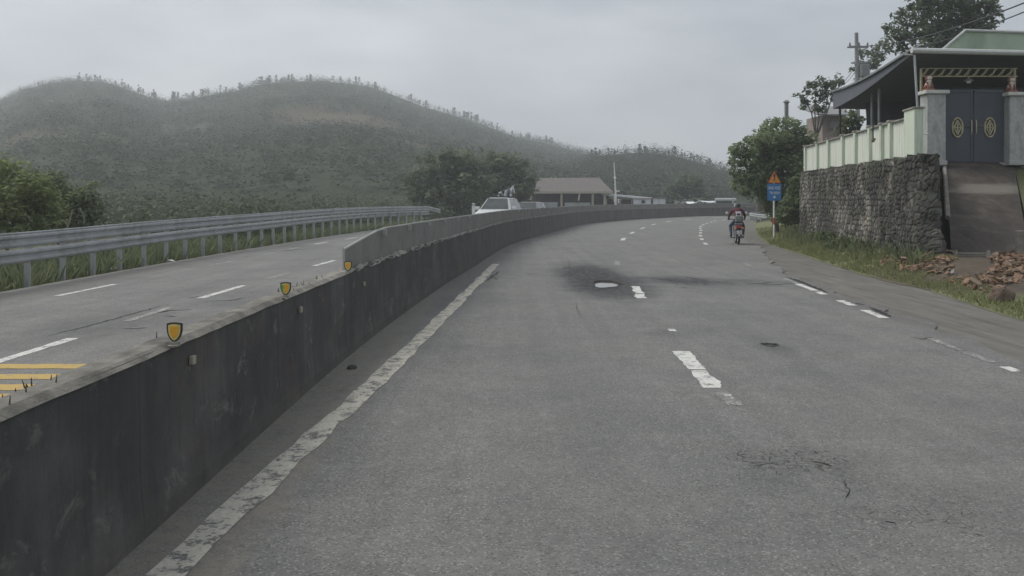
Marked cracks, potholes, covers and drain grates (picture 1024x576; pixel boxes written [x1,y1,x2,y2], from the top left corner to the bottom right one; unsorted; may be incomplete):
pothole [593,280,624,288]
crack [730,447,851,499]
crack [844,502,988,535]
